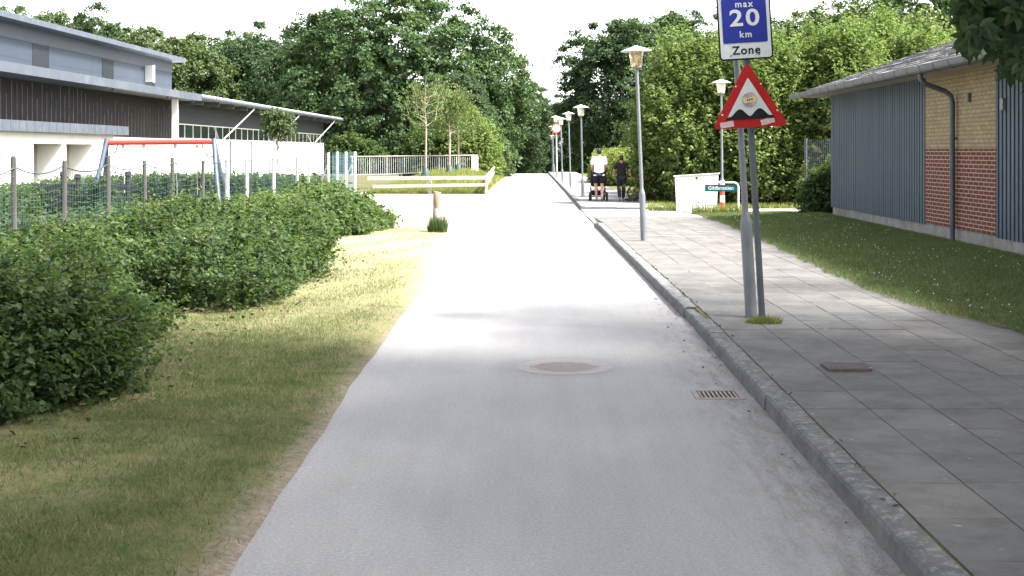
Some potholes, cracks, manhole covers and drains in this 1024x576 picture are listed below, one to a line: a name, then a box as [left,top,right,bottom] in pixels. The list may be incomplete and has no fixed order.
manhole cover [516,359,613,375]
utility cover [820,363,873,372]
drain grate [690,389,747,399]
